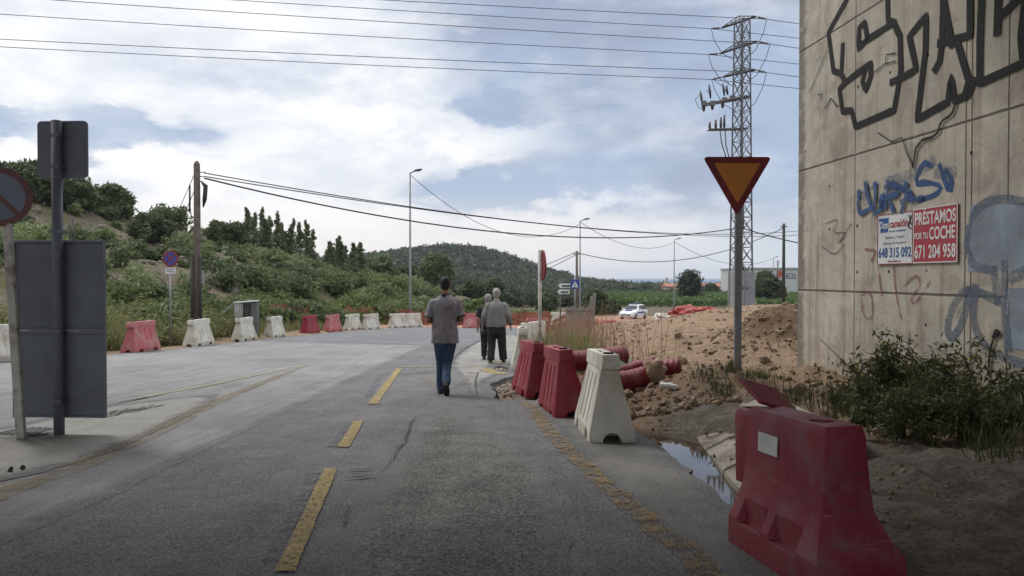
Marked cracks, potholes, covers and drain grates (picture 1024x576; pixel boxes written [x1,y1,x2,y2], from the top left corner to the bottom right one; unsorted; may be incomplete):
crack [347,411,430,478]
crack [452,340,481,396]
